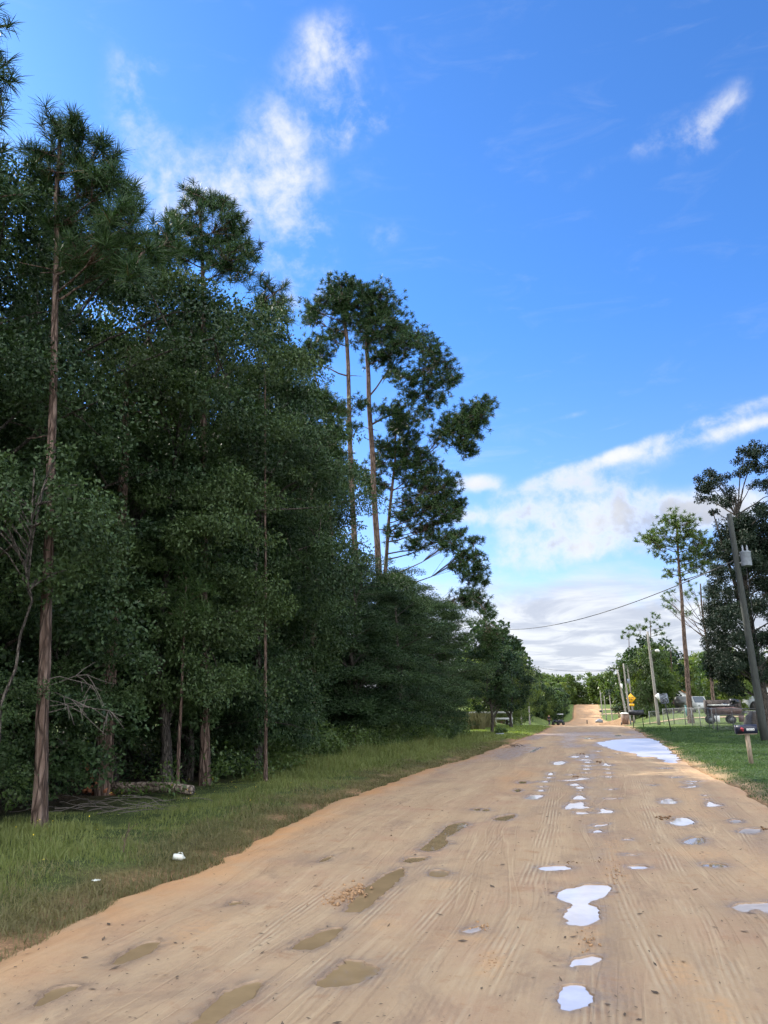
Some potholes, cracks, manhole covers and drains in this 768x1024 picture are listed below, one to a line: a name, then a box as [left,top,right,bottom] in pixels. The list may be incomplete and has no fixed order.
pothole [419,822,469,851]
pothole [731,901,768,913]
pothole [555,983,595,1011]
pothole [568,954,603,967]
pothole [109,941,161,965]
pothole [314,959,381,988]
pothole [343,867,406,913]
pothole [290,927,343,950]
pothole [668,817,696,826]
pothole [185,980,265,1024]
pothole [33,984,81,1007]
pothole [595,738,682,763]
